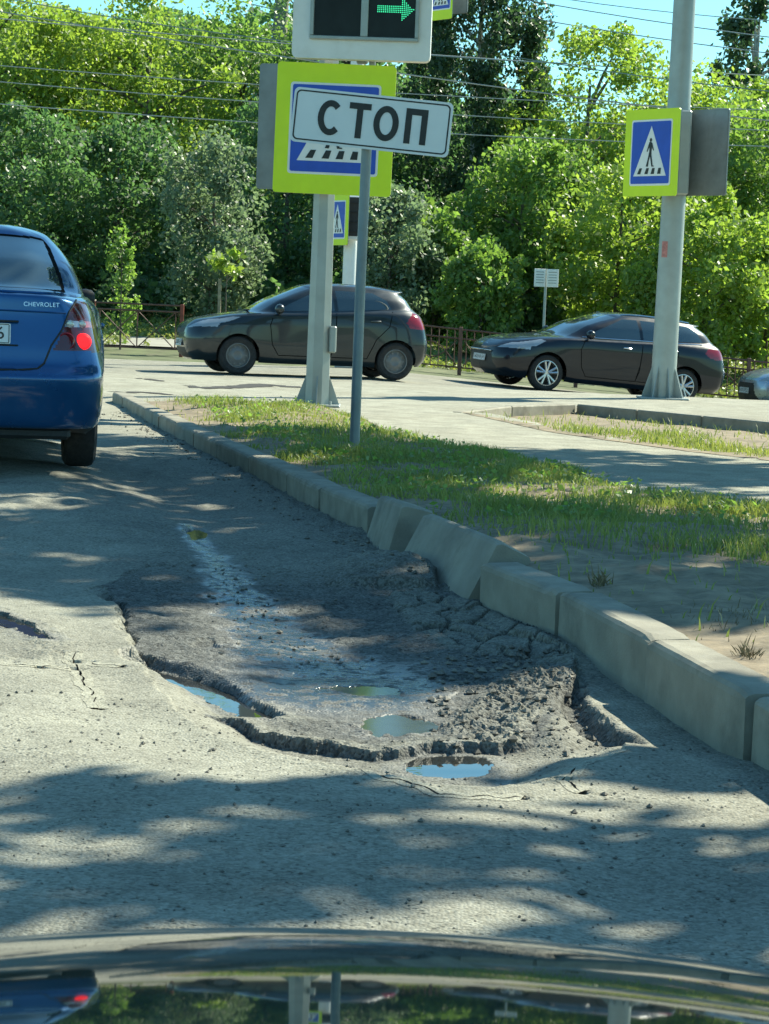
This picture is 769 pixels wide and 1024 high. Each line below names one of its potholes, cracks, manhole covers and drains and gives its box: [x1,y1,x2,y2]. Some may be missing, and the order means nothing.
crack [0,651,125,710]
pothole [85,555,626,787]
crack [386,576,590,677]
pothole [0,611,65,660]
